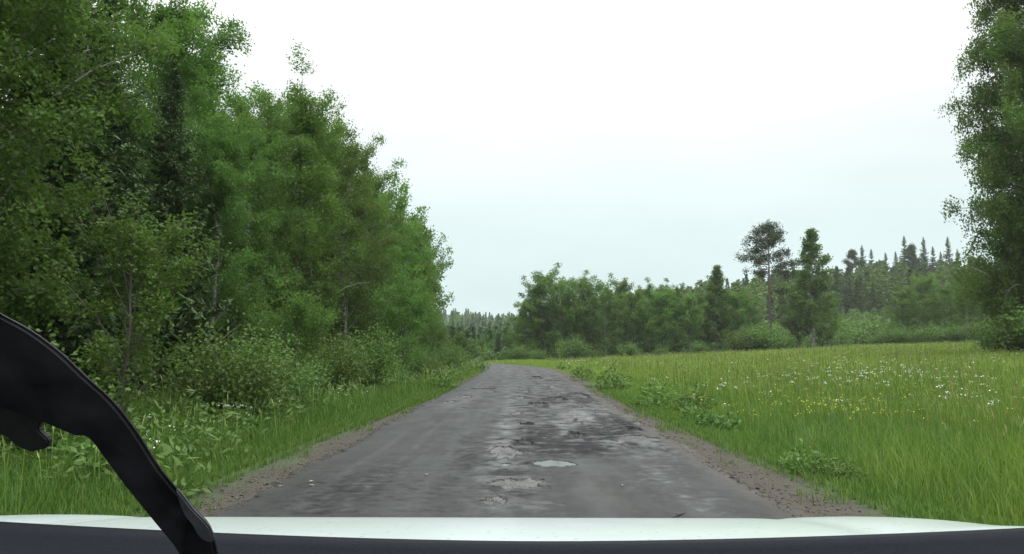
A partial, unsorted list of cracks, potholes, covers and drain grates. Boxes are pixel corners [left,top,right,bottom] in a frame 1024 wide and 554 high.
pothole [562,430,591,440]
pothole [475,476,556,491]
pothole [507,438,538,446]
pothole [483,445,532,460]
pothole [468,492,515,507]
pothole [526,459,584,468]
